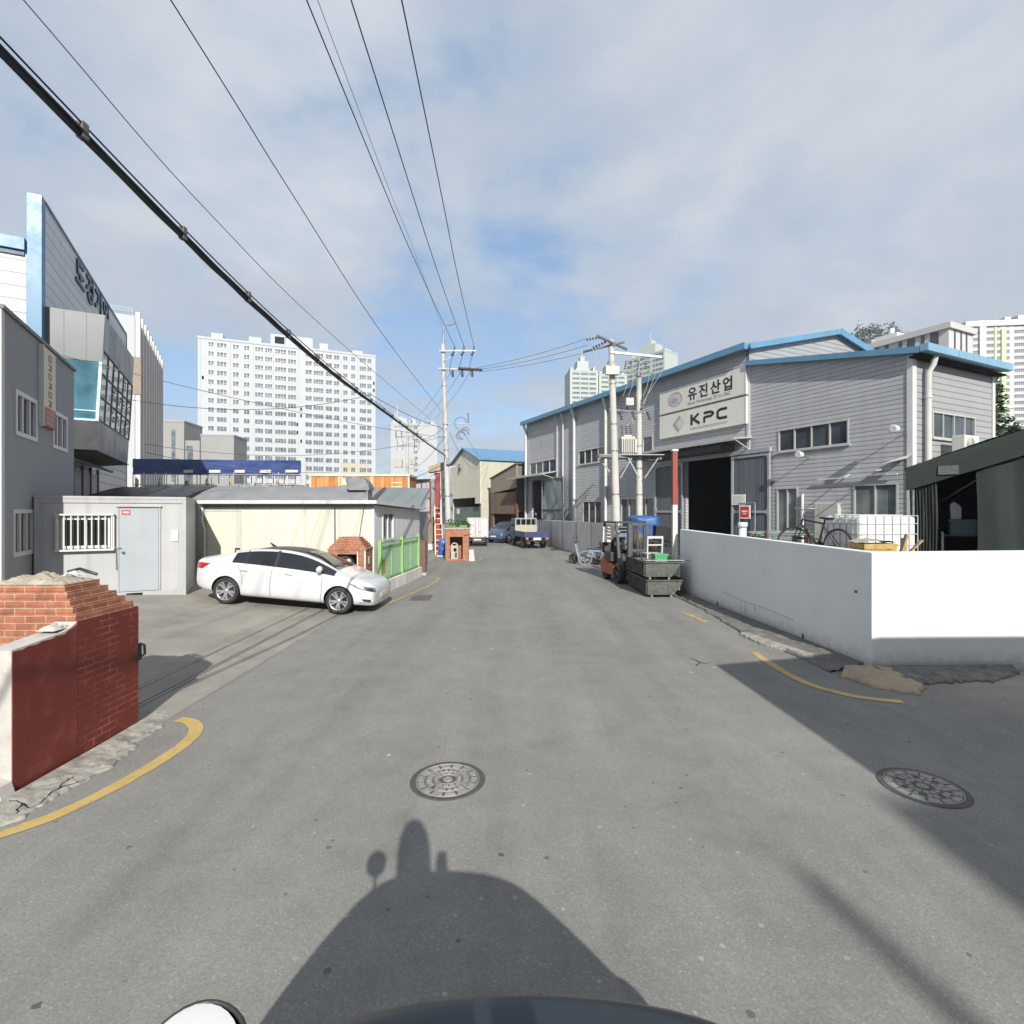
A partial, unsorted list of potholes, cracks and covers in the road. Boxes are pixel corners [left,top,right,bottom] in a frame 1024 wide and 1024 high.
manhole cover [410,762,485,801]
crack [9,776,87,812]
manhole cover [876,768,974,809]
